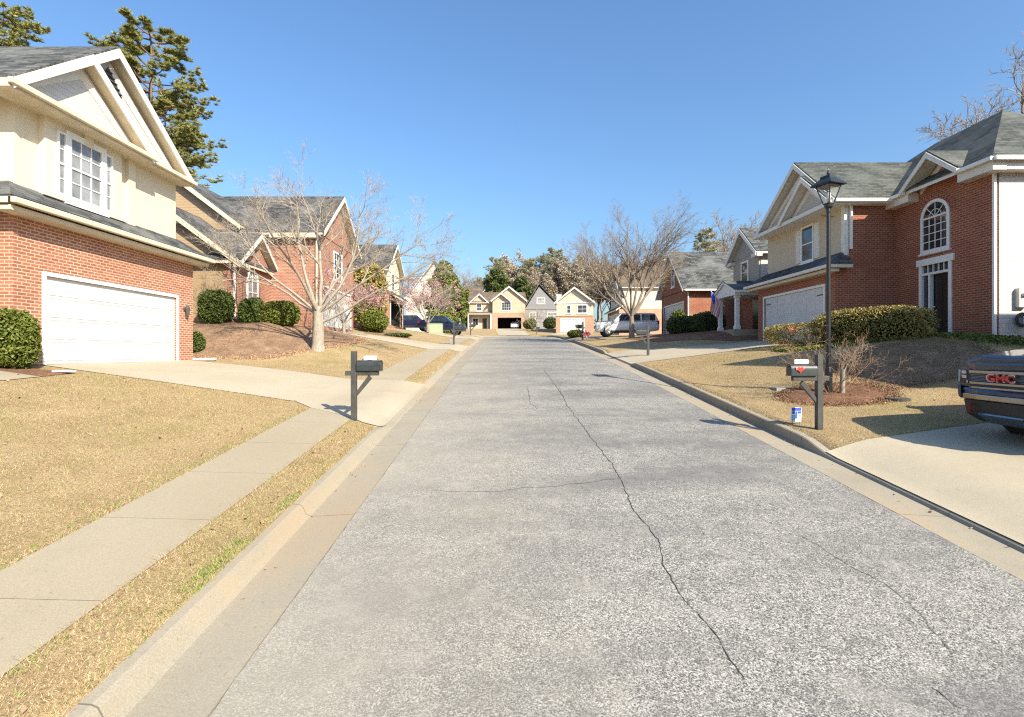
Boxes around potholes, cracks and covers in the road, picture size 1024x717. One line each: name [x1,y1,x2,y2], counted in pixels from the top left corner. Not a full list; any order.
crack [441,370,744,678]
crack [804,537,951,651]
